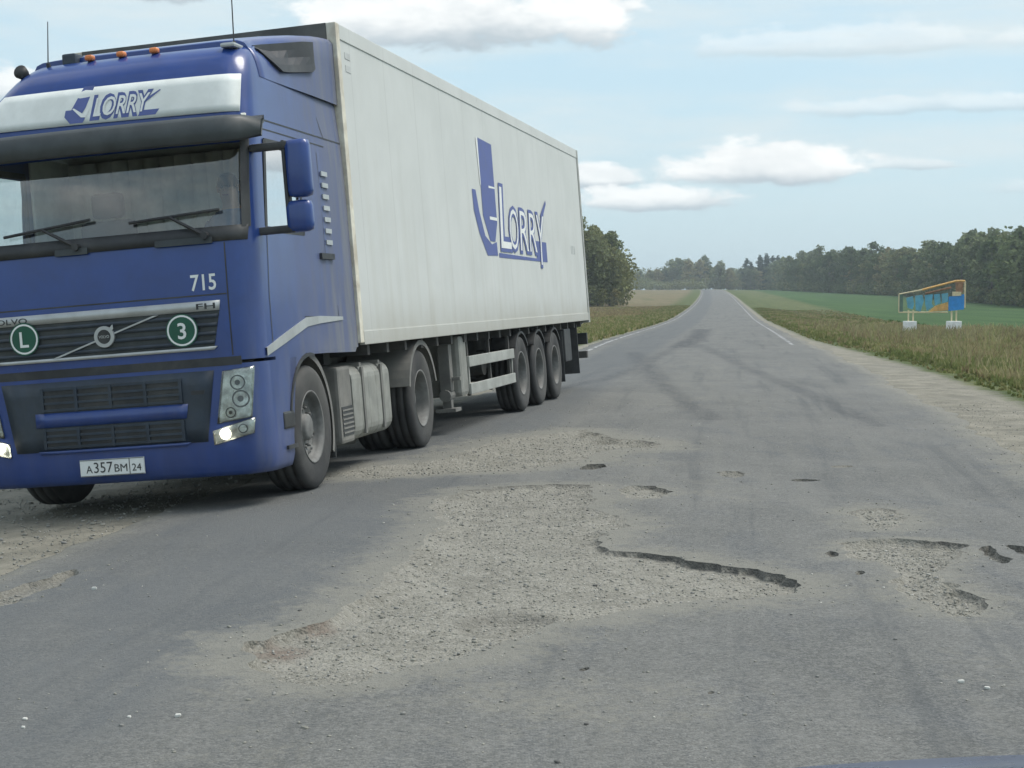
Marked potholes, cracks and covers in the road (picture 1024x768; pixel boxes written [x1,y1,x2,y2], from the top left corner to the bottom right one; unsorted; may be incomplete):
pothole [0,569,79,605]
pothole [979,546,1012,564]
pothole [241,484,801,686]
pothole [837,538,990,617]
pothole [1006,545,1024,554]
pothole [336,430,662,479]
